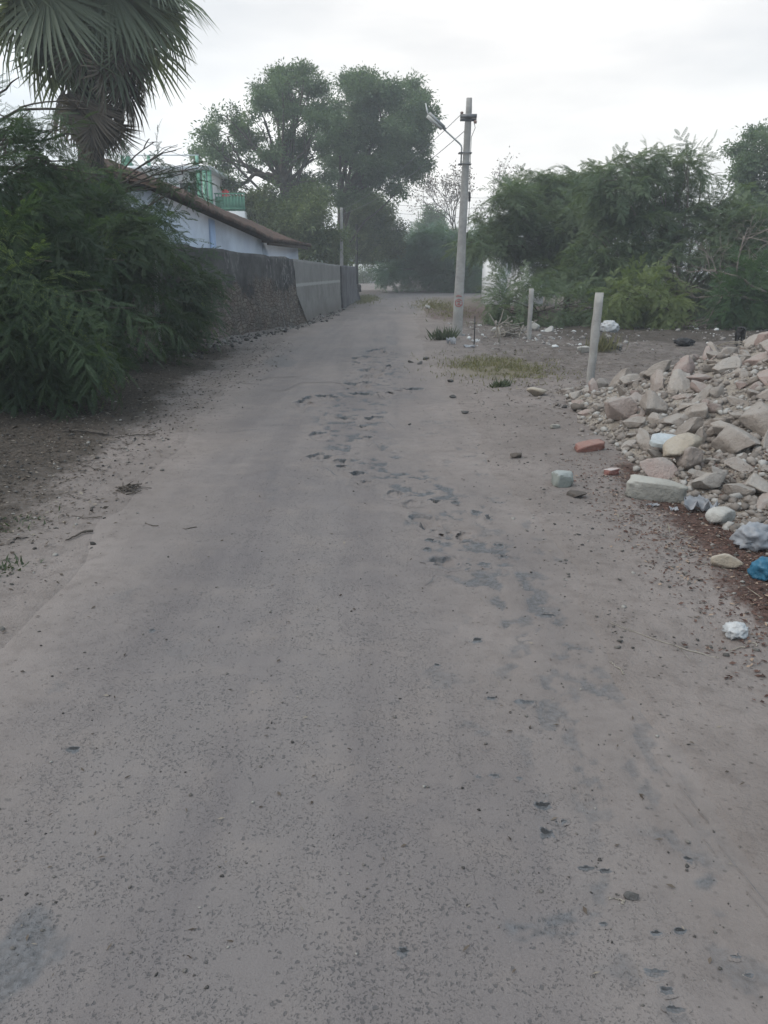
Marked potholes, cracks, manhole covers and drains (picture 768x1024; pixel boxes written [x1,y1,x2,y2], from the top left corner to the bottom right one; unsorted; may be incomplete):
pothole [421,497,448,506]
pothole [655,982,679,999]
pothole [343,469,372,478]
pothole [302,431,337,442]
pothole [596,866,617,876]
pothole [638,965,674,982]
pothole [573,863,598,875]
pothole [530,799,557,813]
